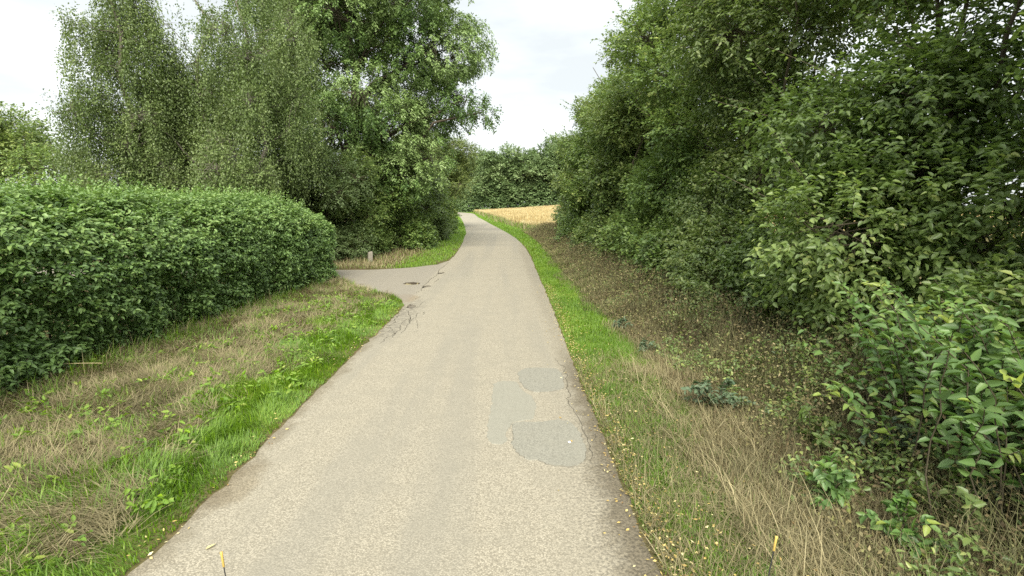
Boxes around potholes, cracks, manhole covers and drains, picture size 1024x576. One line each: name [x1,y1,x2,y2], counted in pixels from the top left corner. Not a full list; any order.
crack [557,361,596,459]
crack [375,267,444,343]
